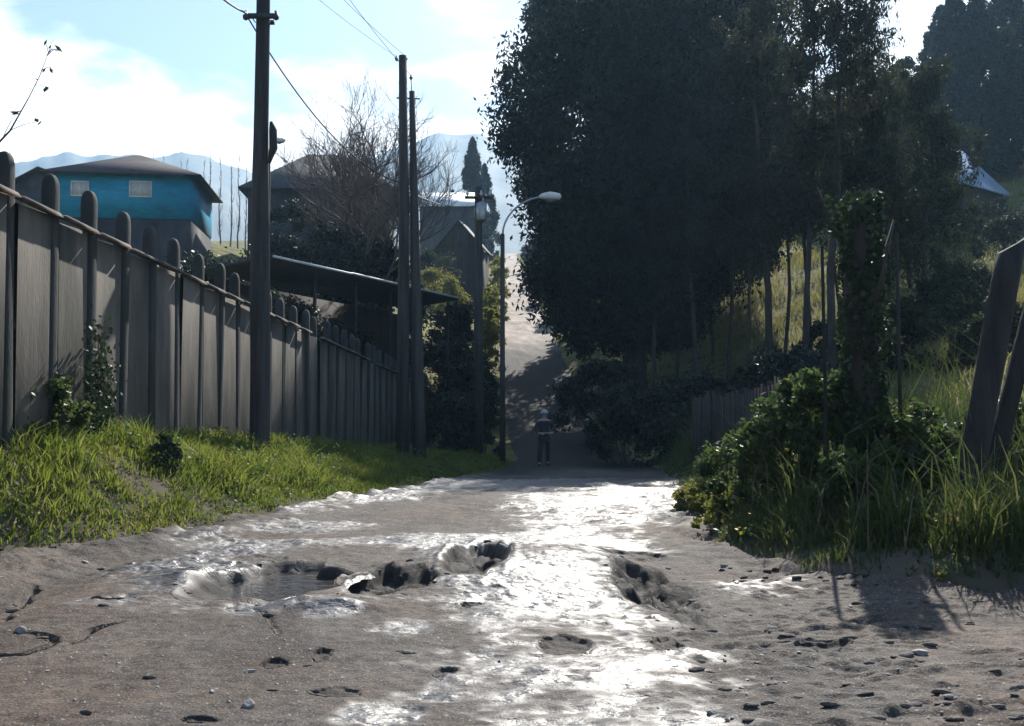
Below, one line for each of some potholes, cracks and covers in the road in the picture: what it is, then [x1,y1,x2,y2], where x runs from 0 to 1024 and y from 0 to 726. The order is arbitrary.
crack [0,585,122,657]
pothole [170,559,376,606]
pothole [438,542,512,577]
pothole [333,562,436,597]
pothole [306,686,361,697]
pothole [536,633,597,656]
pothole [259,657,290,669]
pothole [180,715,219,724]
pothole [606,553,714,631]
